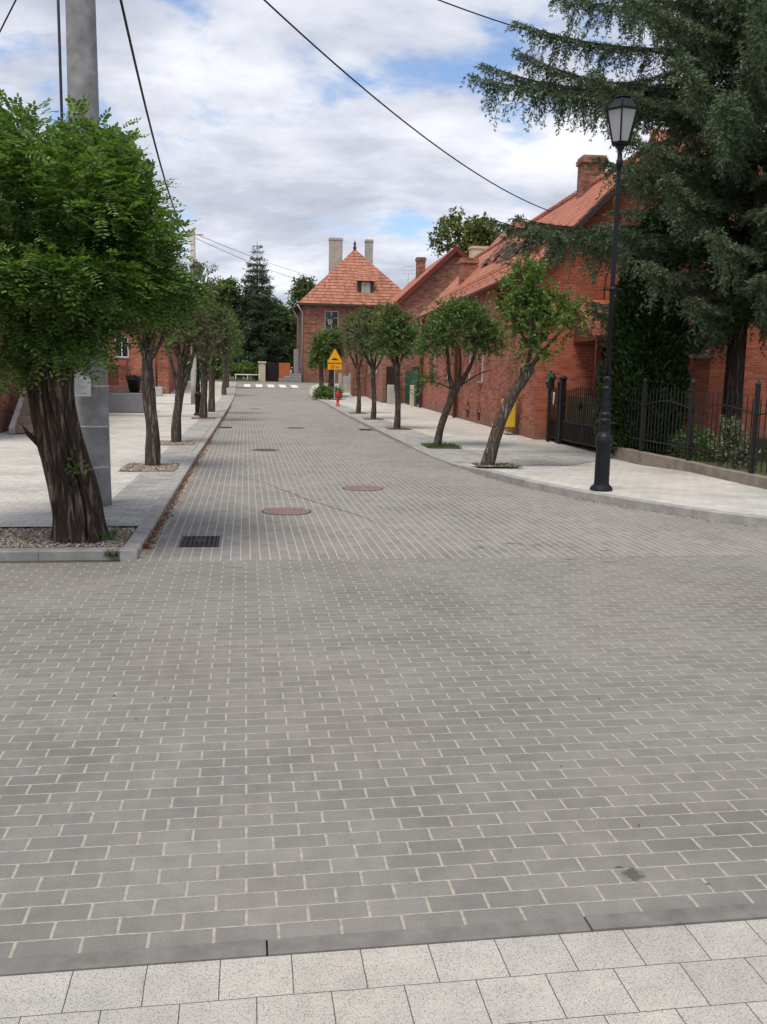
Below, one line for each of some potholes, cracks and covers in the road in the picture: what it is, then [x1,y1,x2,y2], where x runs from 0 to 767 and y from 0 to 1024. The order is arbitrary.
manhole cover [262,507,311,515]
drain grate [179,536,220,547]
